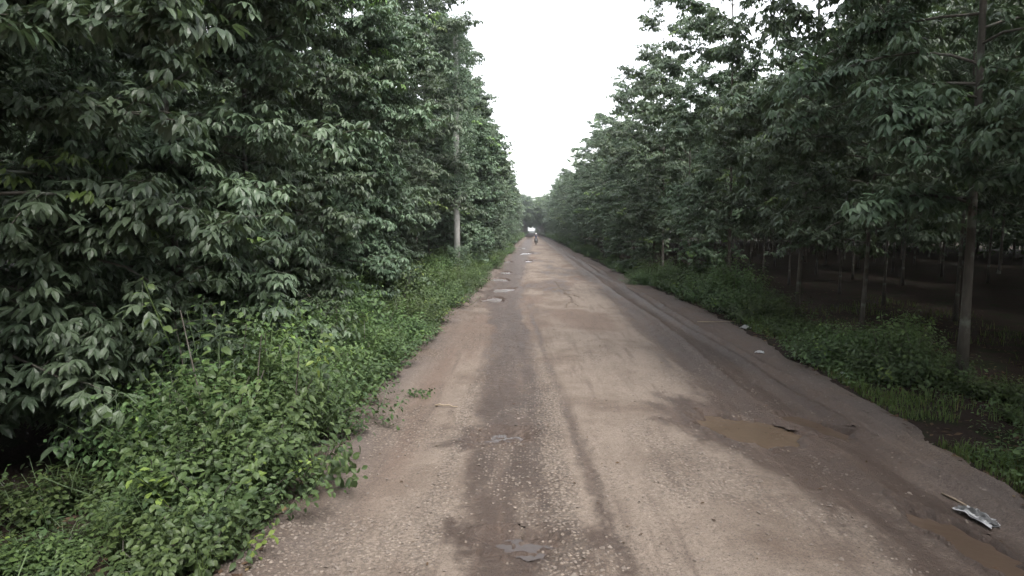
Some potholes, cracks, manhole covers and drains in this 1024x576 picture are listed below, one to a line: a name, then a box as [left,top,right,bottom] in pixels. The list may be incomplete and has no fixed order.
crack [553,282,579,308]
pothole [477,295,508,303]
pothole [766,409,866,446]
pothole [675,406,824,455]
pothole [878,488,1024,576]
